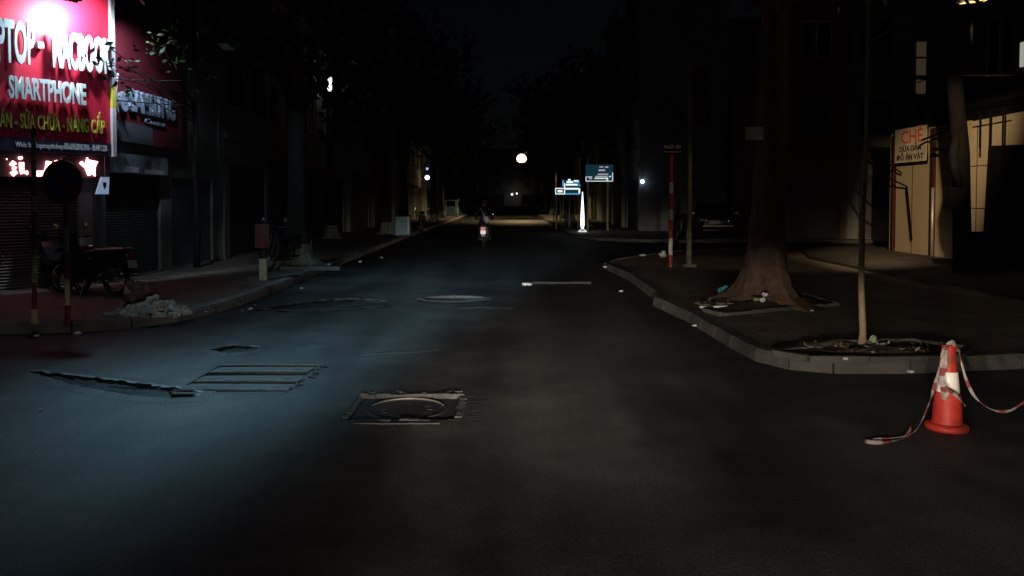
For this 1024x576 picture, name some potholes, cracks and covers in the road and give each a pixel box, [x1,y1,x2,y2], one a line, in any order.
pothole [197,344,271,357]
manhole cover [341,390,491,425]
pothole [15,369,216,403]
